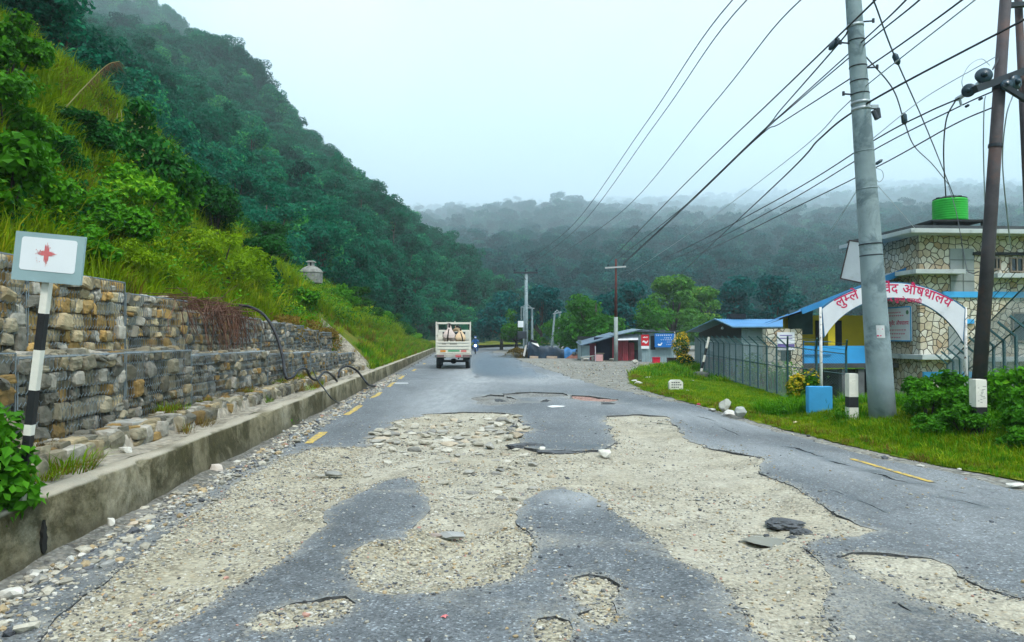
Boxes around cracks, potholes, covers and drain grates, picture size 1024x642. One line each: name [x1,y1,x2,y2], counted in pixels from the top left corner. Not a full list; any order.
pothole [841,554,1024,634]
pothole [534,619,573,642]
pothole [44,447,364,642]
pothole [348,526,534,595]
pothole [356,413,576,535]
